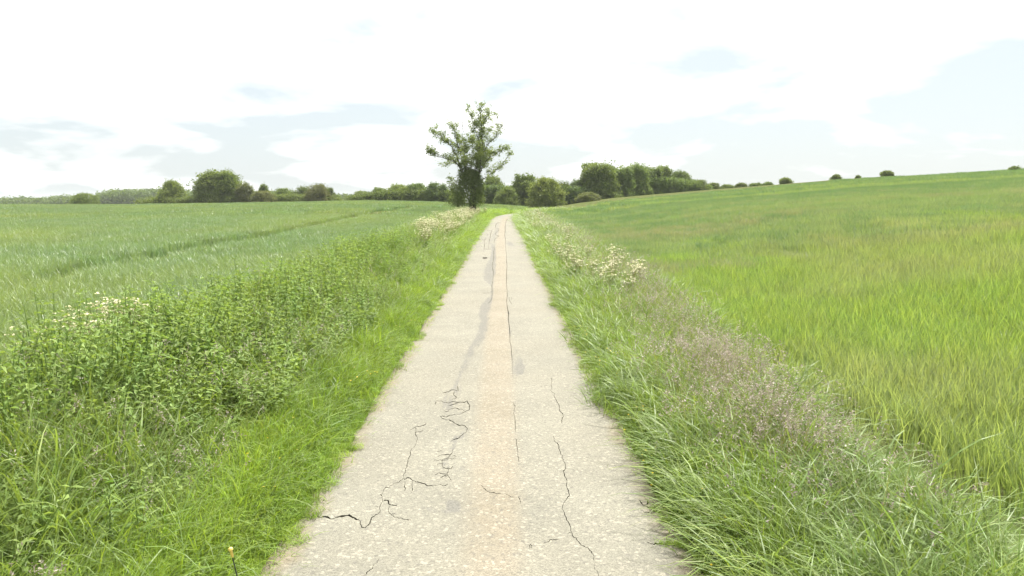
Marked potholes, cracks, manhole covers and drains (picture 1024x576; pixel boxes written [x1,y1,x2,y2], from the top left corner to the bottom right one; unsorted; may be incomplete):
crack [320,386,470,528]
crack [529,442,599,576]
